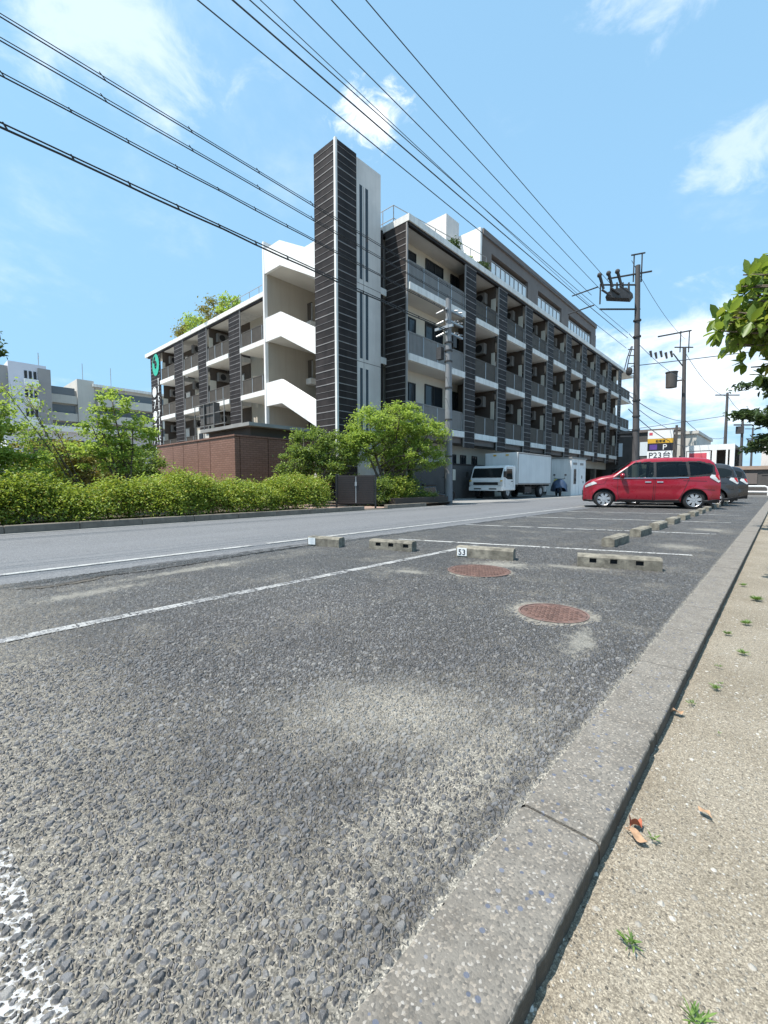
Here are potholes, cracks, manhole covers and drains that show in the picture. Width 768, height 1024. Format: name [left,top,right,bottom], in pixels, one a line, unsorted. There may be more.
manhole cover [448,564,516,578]
manhole cover [513,602,602,627]
